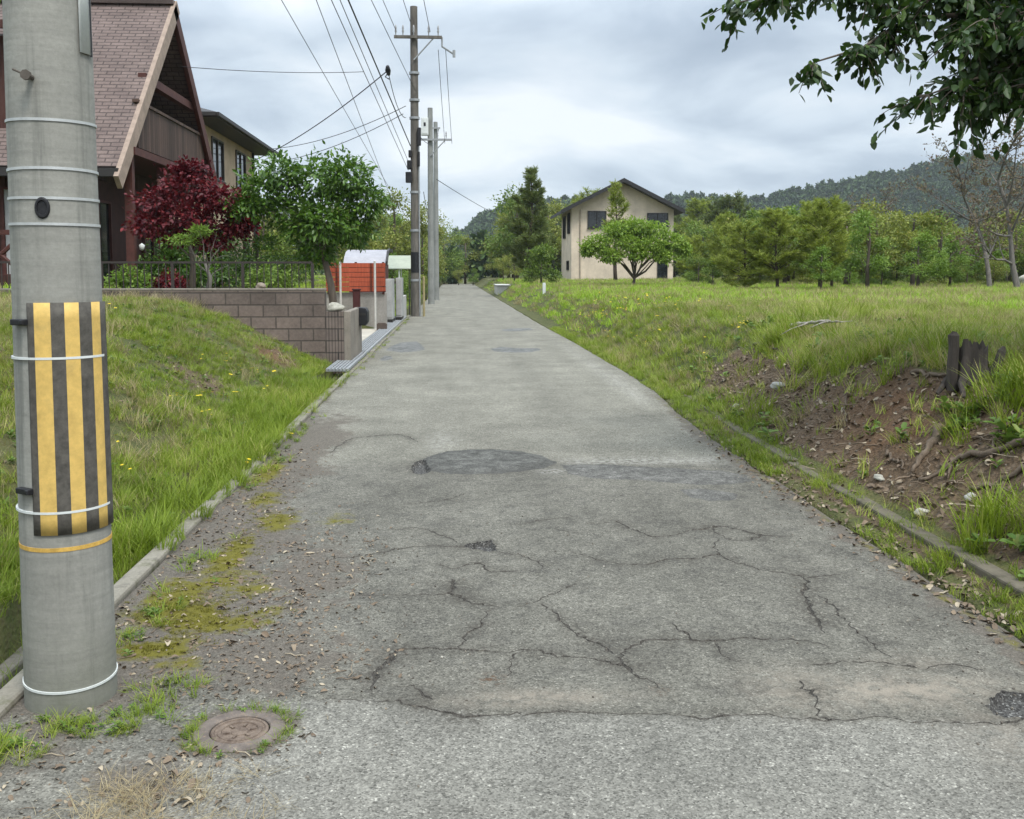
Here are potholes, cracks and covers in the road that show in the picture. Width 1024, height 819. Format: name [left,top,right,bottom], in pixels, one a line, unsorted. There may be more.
drain grate [362,341,379,350]
manhole cover [193,710,286,753]
pothole [985,690,1024,718]
drain grate [326,357,361,372]
crack [317,521,983,700]
pothole [464,540,496,552]
